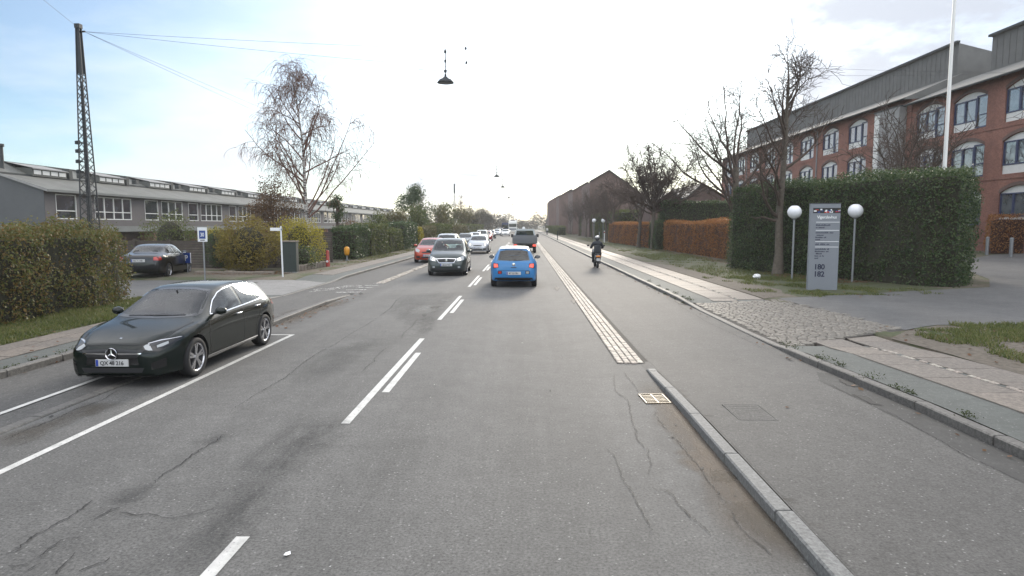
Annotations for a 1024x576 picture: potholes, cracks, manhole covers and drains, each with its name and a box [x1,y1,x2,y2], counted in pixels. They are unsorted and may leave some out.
crack [155,435,222,483]
manhole cover [722,404,778,420]
crack [614,372,667,474]
crack [605,447,711,534]
drain grate [638,394,672,404]
crack [8,499,208,574]
